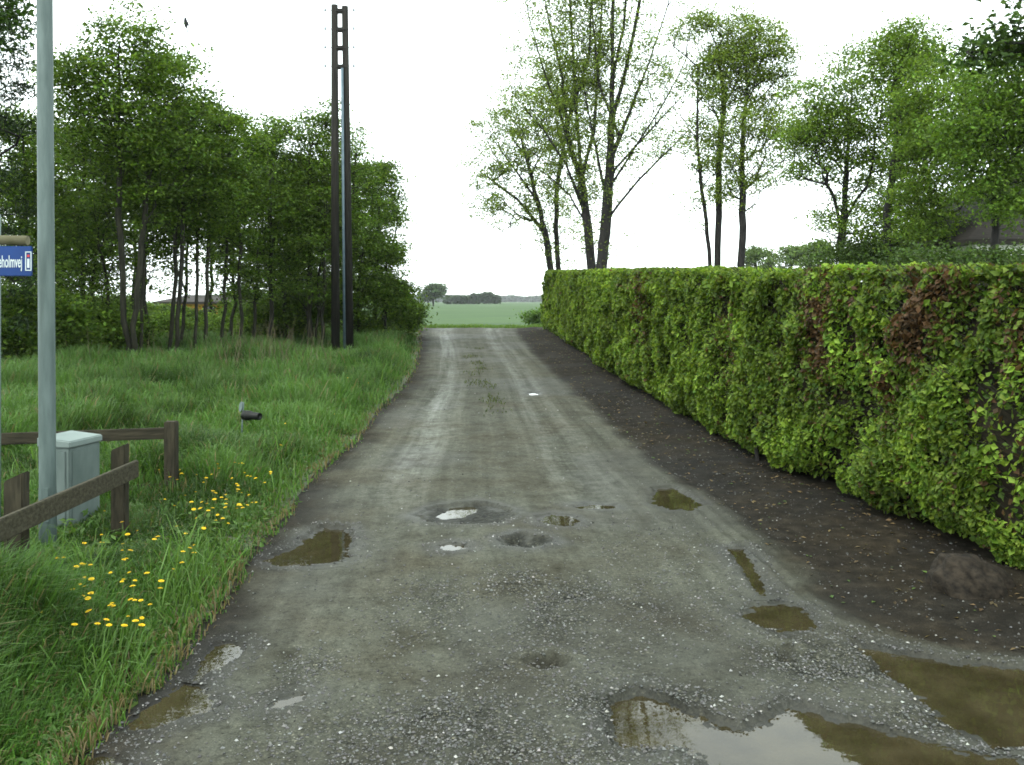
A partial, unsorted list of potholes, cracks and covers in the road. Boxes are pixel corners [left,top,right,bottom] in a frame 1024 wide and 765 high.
pothole [100,679,242,743]
pothole [561,501,629,512]
pothole [574,677,1024,765]
pothole [485,528,570,551]
pothole [172,635,264,684]
pothole [635,483,719,515]
pothole [426,539,479,554]
pothole [505,645,587,676]
pothole [247,519,371,571]
pothole [524,510,594,530]
pothole [716,595,835,639]
pothole [712,543,786,600]
